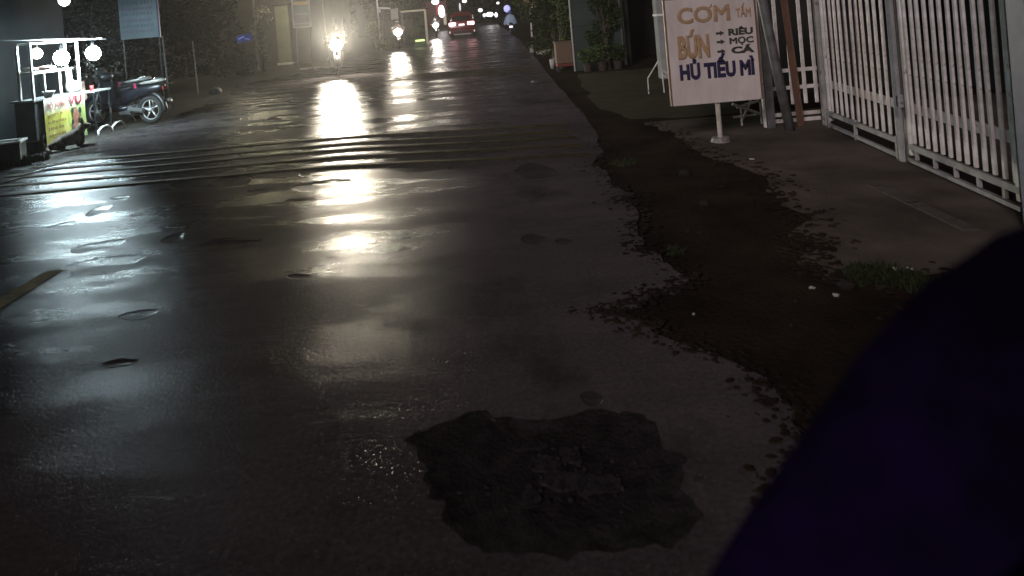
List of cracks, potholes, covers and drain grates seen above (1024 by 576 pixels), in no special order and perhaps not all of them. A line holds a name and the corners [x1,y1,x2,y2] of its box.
pothole [118,309,159,320]
pothole [520,234,547,244]
pothole [101,358,139,368]
pothole [405,409,704,561]
pothole [513,163,559,179]
pothole [580,391,604,406]
pothole [160,232,184,243]
